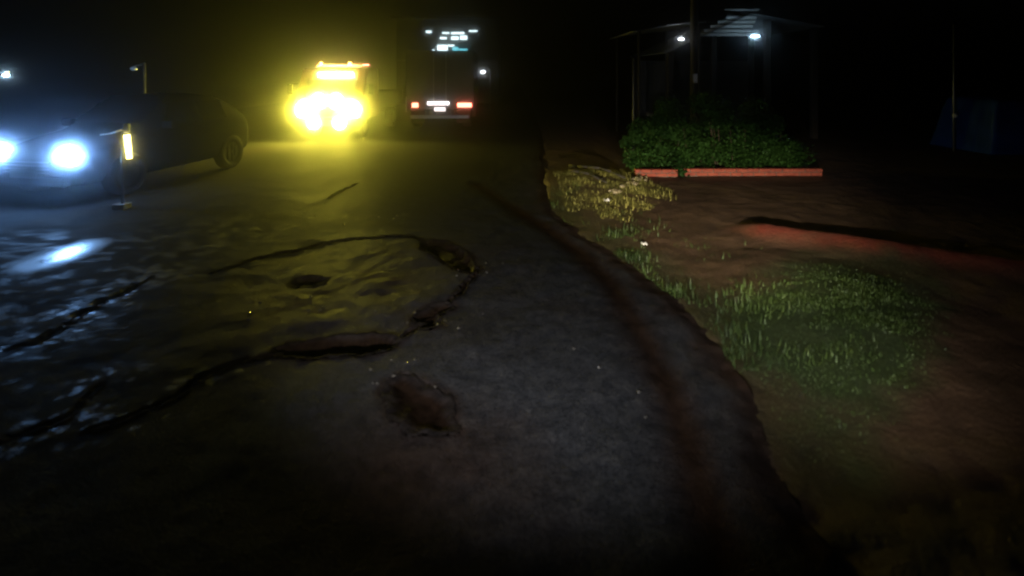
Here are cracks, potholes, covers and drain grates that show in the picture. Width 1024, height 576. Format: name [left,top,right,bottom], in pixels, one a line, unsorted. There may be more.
pothole [286,275,331,288]
crack [0,275,284,442]
pothole [381,373,462,439]
crack [326,183,358,199]
